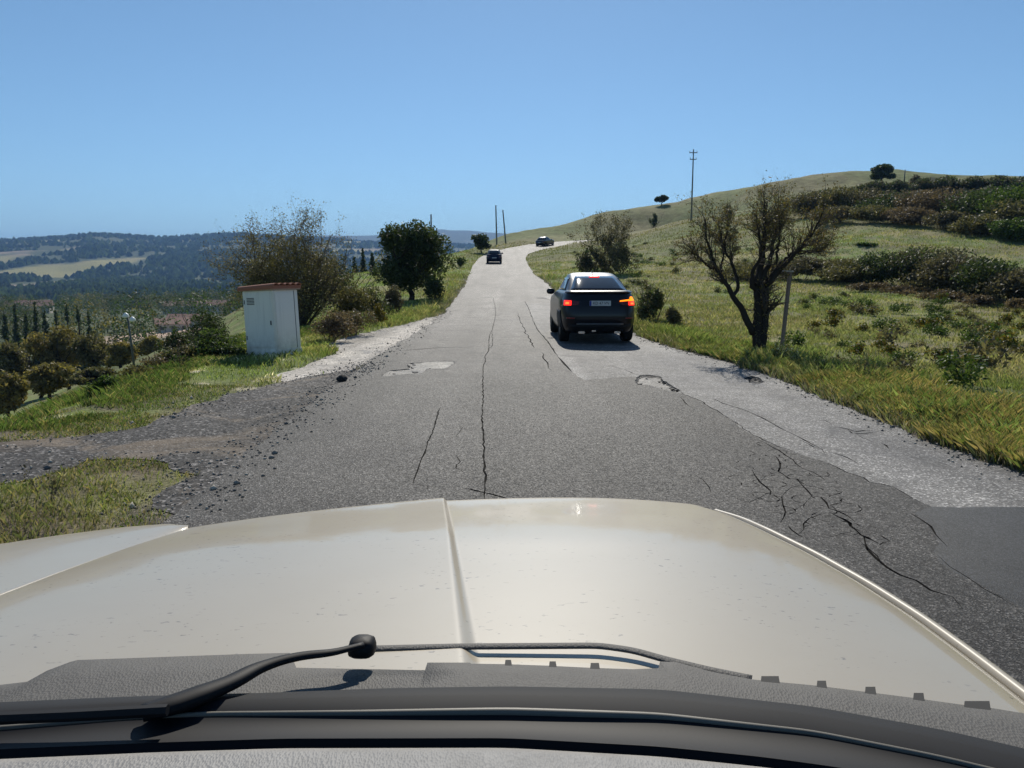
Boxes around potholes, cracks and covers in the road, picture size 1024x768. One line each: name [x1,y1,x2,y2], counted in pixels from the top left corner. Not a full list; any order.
pothole [635,375,680,392]
pothole [744,376,764,384]
crack [413,299,505,499]
crack [518,302,572,372]
crack [681,392,1009,609]
